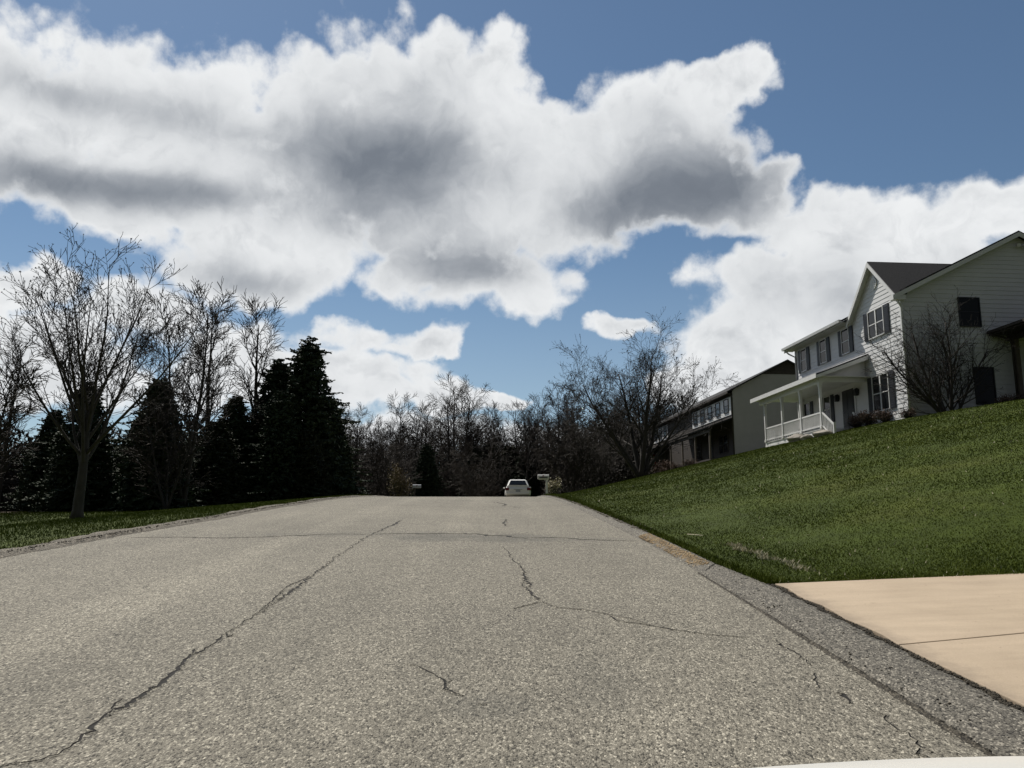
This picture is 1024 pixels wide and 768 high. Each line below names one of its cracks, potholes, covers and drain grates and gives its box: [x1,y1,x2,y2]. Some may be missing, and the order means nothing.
crack [0,502,748,767]
crack [772,638,933,757]
